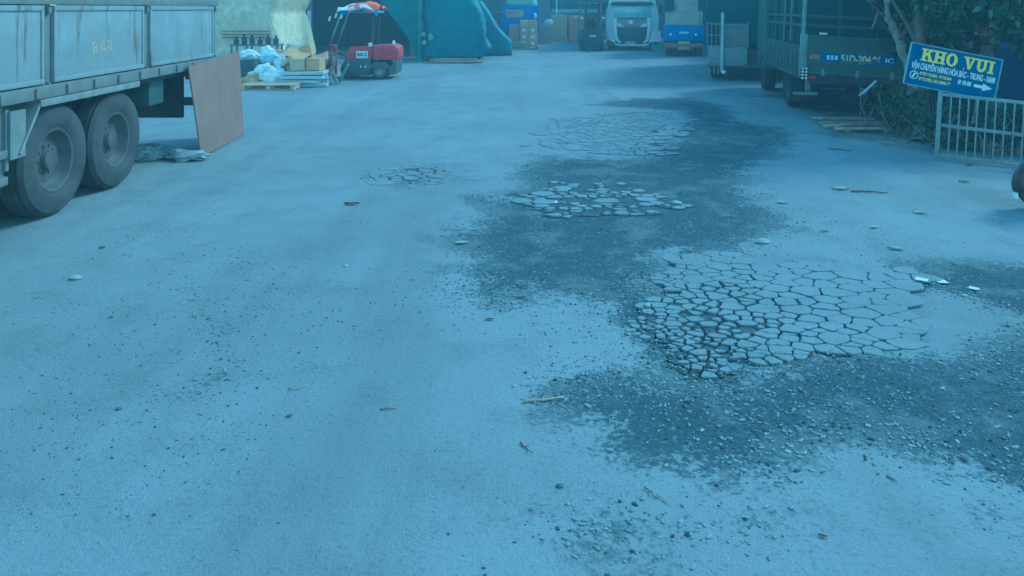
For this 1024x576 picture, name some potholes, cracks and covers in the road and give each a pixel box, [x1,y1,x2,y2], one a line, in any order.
crack [520,110,699,156]
crack [366,159,483,187]
crack [625,250,950,380]
crack [505,181,696,219]
